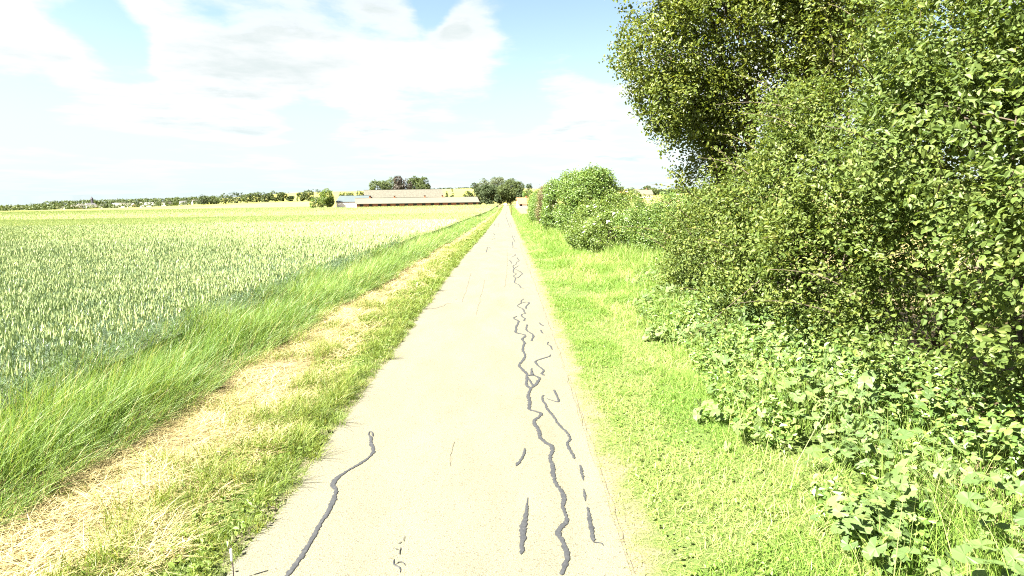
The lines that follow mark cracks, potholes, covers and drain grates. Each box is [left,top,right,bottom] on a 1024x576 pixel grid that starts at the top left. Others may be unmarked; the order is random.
crack [521,250,635,573]
